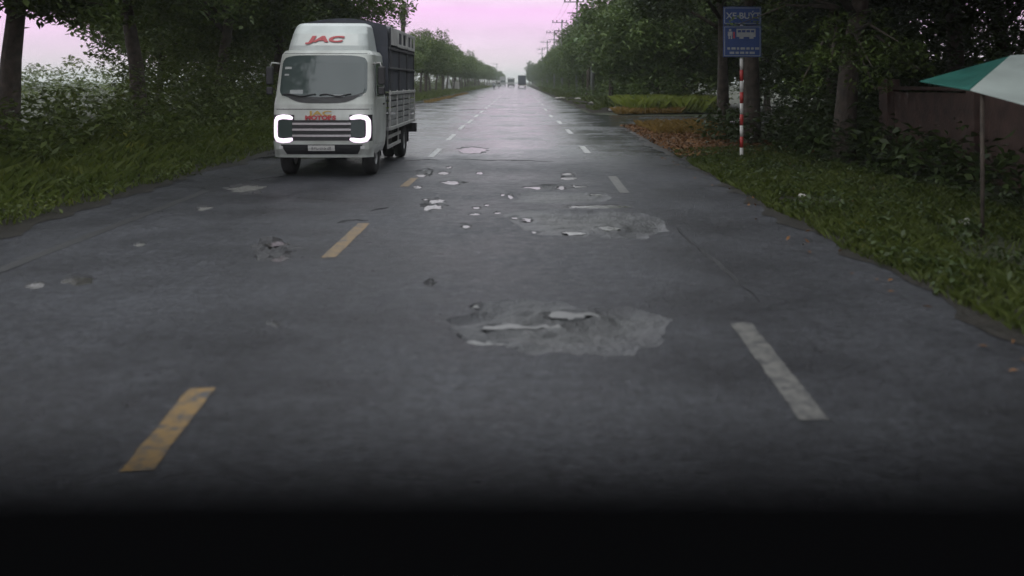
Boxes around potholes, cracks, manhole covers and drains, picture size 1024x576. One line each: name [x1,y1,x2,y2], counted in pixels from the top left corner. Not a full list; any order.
pothole [414,168,434,177]
pothole [418,197,449,213]
pothole [251,236,305,262]
pothole [59,274,98,286]
pothole [445,298,674,356]
crack [676,227,760,302]
